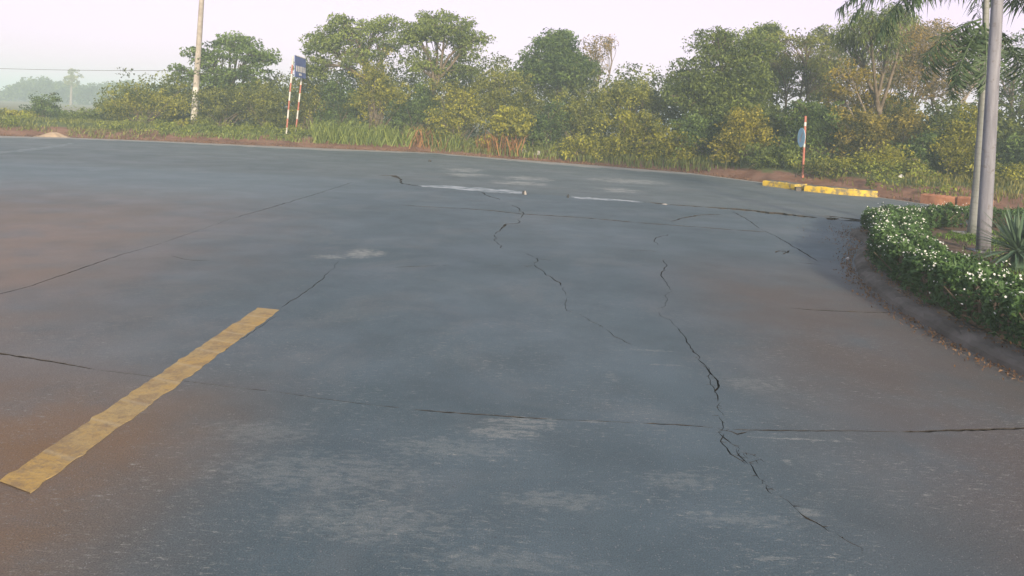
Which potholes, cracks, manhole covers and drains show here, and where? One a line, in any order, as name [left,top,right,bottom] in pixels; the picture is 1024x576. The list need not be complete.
crack [0,234,1024,547]
crack [408,192,861,344]
crack [0,183,349,294]
